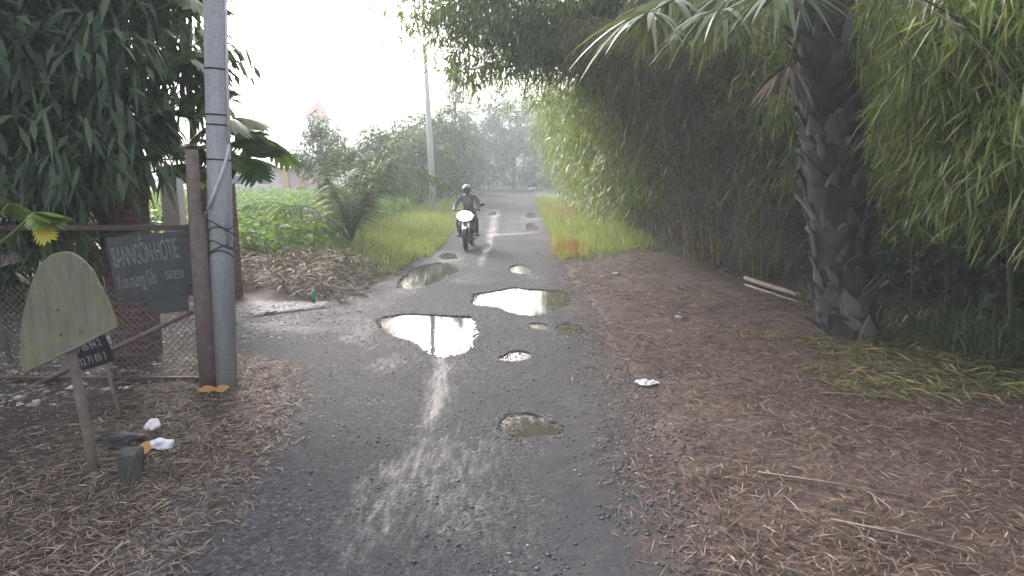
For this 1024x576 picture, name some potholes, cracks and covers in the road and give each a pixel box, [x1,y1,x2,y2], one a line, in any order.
pothole [508,265,532,274]
pothole [496,412,569,438]
pothole [554,324,588,336]
pothole [374,313,480,358]
pothole [396,263,459,289]
pothole [471,287,574,316]
pothole [499,350,532,361]
